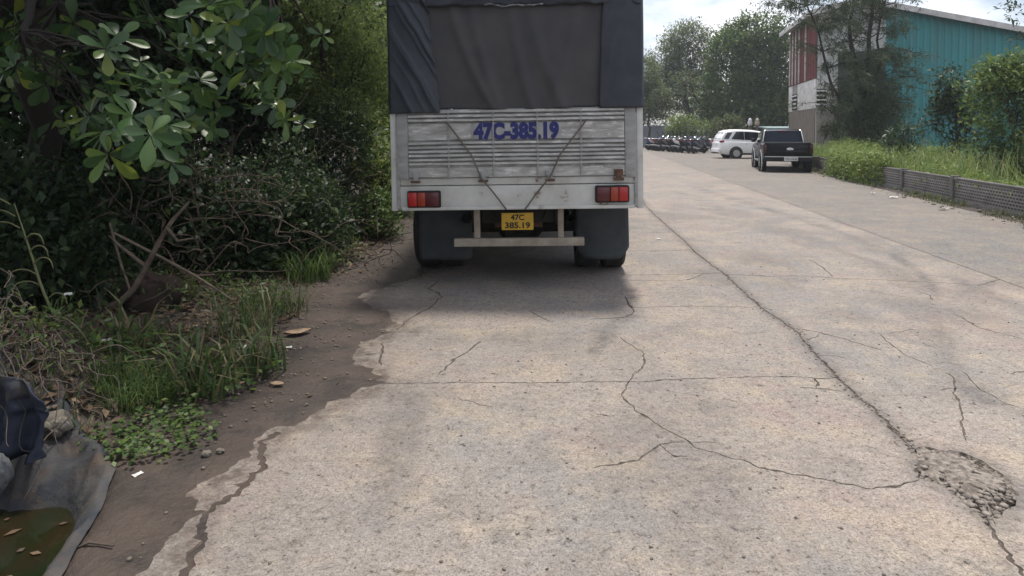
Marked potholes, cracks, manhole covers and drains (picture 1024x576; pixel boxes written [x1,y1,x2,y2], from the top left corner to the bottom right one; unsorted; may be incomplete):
pothole [913,446,1019,526]
crack [594,337,920,489]
crack [178,432,280,576]
crack [599,297,635,319]
crack [796,328,1019,442]
crack [366,281,481,375]
